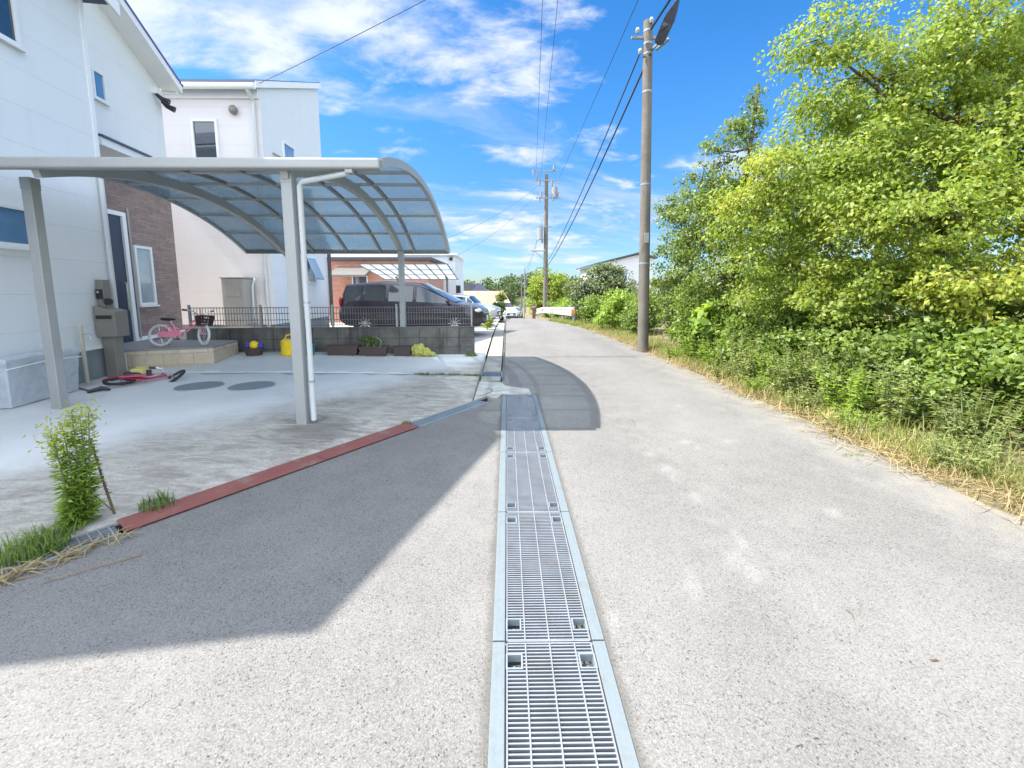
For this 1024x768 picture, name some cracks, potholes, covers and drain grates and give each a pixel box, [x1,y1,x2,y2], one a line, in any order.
drain grate [0,524,122,579]
manhole cover [173,381,225,392]
drain grate [488,641,640,768]
manhole cover [227,381,276,391]
drain grate [502,395,542,418]
drain grate [500,417,552,453]
drain grate [498,452,569,513]
drain grate [493,512,604,643]
